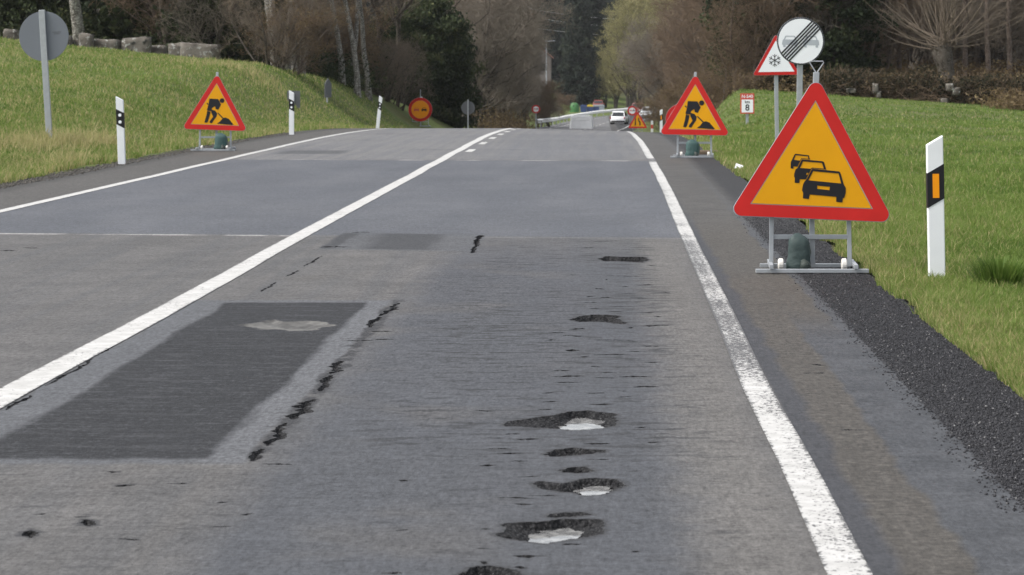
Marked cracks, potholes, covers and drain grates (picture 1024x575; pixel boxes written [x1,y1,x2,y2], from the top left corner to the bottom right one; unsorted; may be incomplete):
pothole [531,478,627,495]
crack [248,303,400,465]
pothole [496,519,605,541]
pothole [543,448,606,457]
pothole [568,315,628,324]
crack [261,232,484,292]
pothole [503,410,618,429]
pothole [459,566,521,575]
